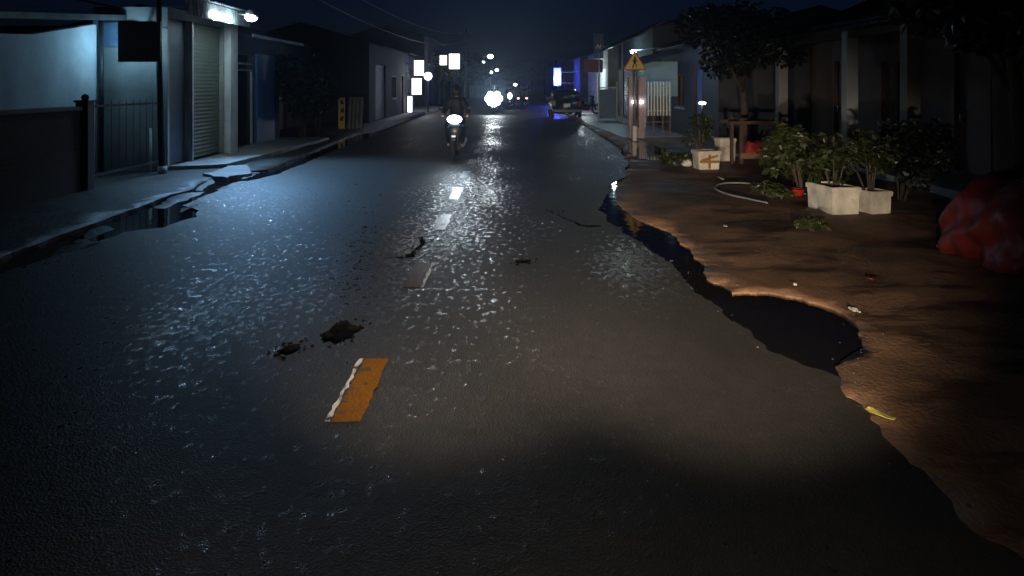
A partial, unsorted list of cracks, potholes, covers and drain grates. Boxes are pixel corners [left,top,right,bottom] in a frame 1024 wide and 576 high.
pothole [319,318,372,348]
crack [545,209,601,227]
pothole [267,338,314,360]
crack [383,235,432,259]
